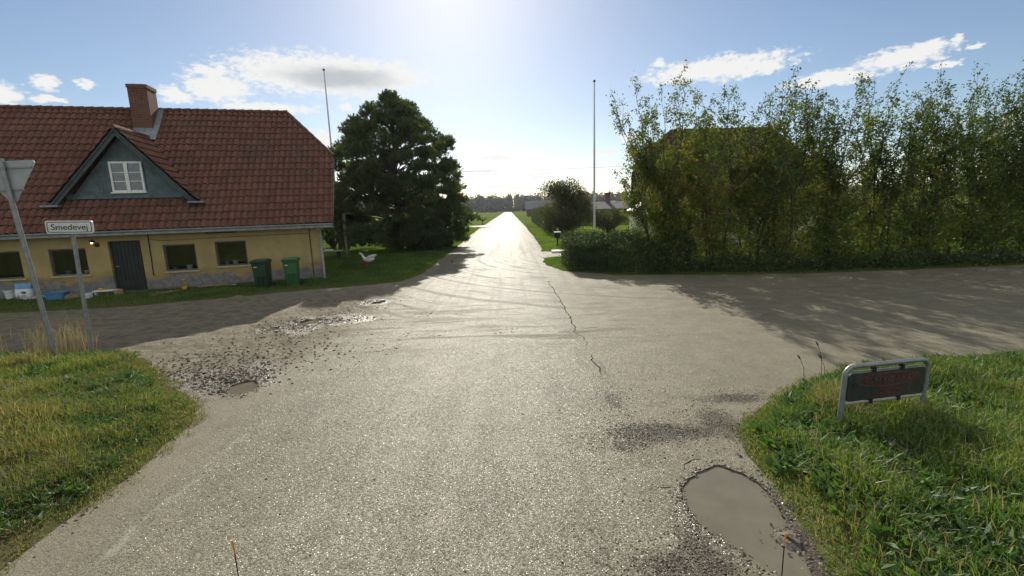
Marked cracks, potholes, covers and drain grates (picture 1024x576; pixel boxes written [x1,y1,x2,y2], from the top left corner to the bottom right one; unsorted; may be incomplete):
crack [548,280,603,377]
pothole [681,465,814,576]
pothole [228,380,259,395]
